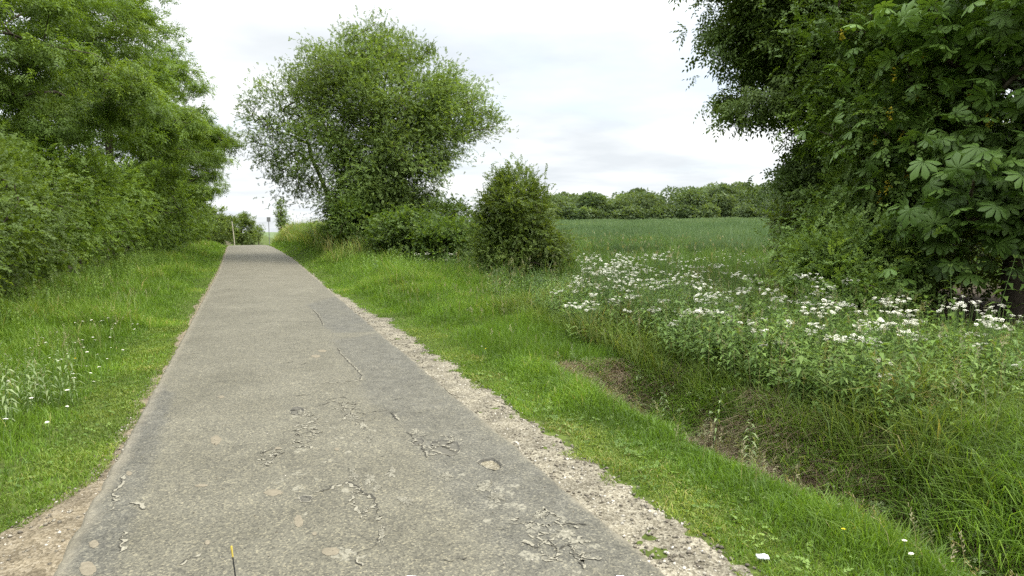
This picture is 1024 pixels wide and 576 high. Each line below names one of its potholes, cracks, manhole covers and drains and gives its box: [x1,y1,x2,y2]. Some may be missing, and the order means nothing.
pothole [476,458,505,471]
crack [257,348,463,465]
crack [316,481,385,566]
crack [117,531,128,553]
crack [110,473,148,510]
crack [509,506,605,568]
